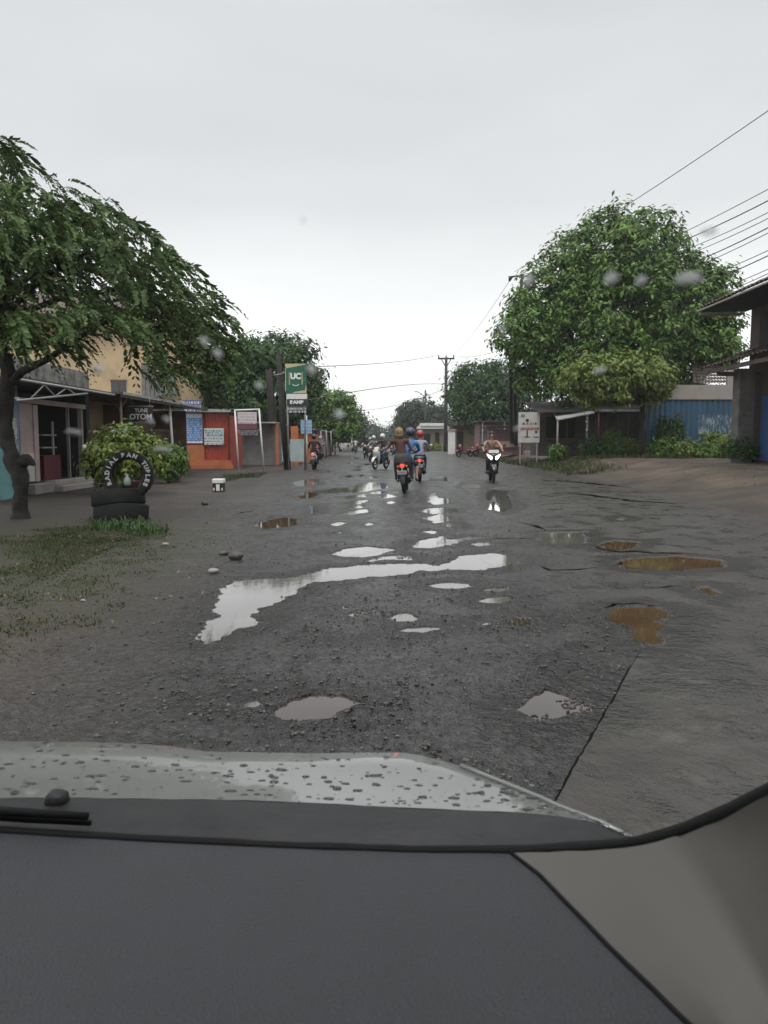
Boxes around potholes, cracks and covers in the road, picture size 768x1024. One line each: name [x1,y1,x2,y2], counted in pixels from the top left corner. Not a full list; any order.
pothole [272,692,369,721]
crack [540,543,696,571]
crack [484,522,546,540]
pothole [537,531,590,546]
crack [599,585,681,611]
pothole [484,490,515,513]
pothole [615,555,728,571]
pothole [597,540,640,551]
pothole [513,688,602,721]
pothole [192,552,529,644]
pothole [252,517,300,529]
pothole [605,605,674,645]
